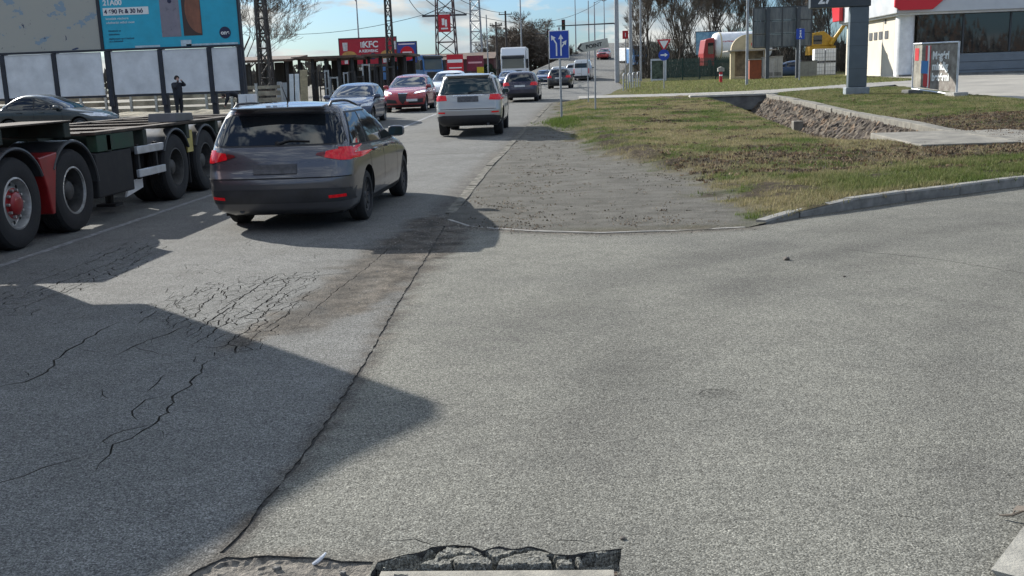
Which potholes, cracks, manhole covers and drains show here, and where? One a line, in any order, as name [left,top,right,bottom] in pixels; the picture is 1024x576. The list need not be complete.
pothole [371,545,622,576]
crack [47,240,341,373]
crack [3,324,114,386]
crack [0,357,219,483]
